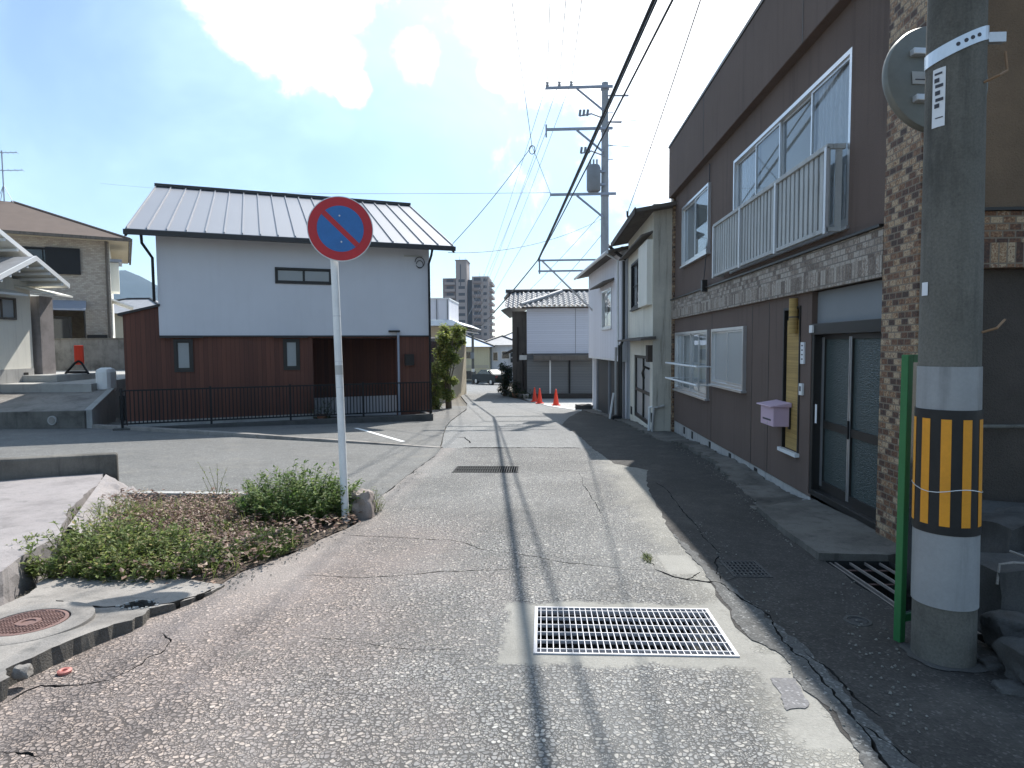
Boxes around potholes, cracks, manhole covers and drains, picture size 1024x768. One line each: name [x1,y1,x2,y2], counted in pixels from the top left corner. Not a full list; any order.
crack [309,535,626,578]
drain grate [719,560,773,578]
crack [0,633,172,706]
drain grate [533,606,740,658]
manhole cover [0,602,95,646]
crack [641,483,916,768]
manhole cover [844,615,872,627]
